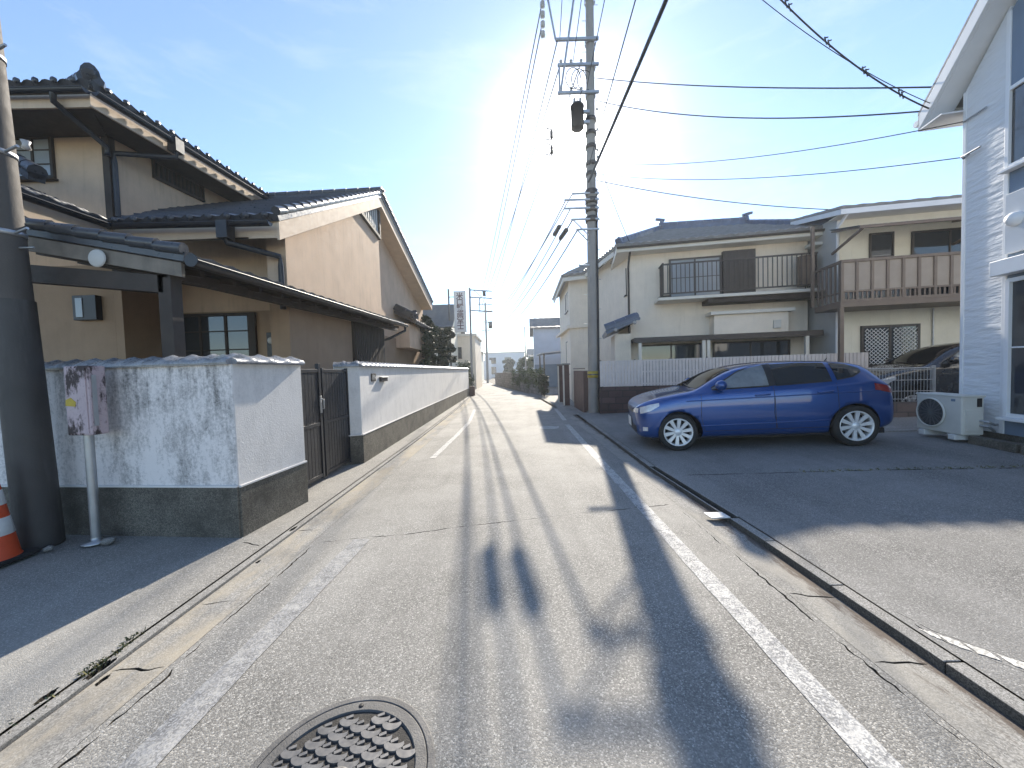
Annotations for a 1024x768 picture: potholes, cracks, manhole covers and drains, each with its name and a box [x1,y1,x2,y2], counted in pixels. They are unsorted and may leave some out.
manhole cover [250,695,435,768]
crack [58,530,312,768]
